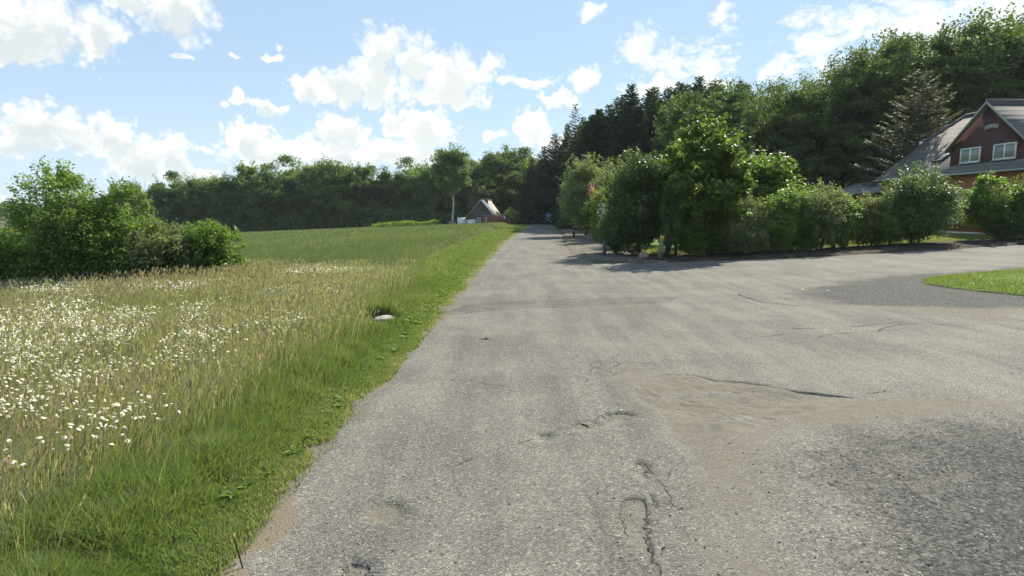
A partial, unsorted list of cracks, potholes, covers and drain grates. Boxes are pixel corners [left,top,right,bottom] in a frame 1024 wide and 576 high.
crack [615,455,681,506]
crack [746,322,948,339]
crack [619,506,662,576]
